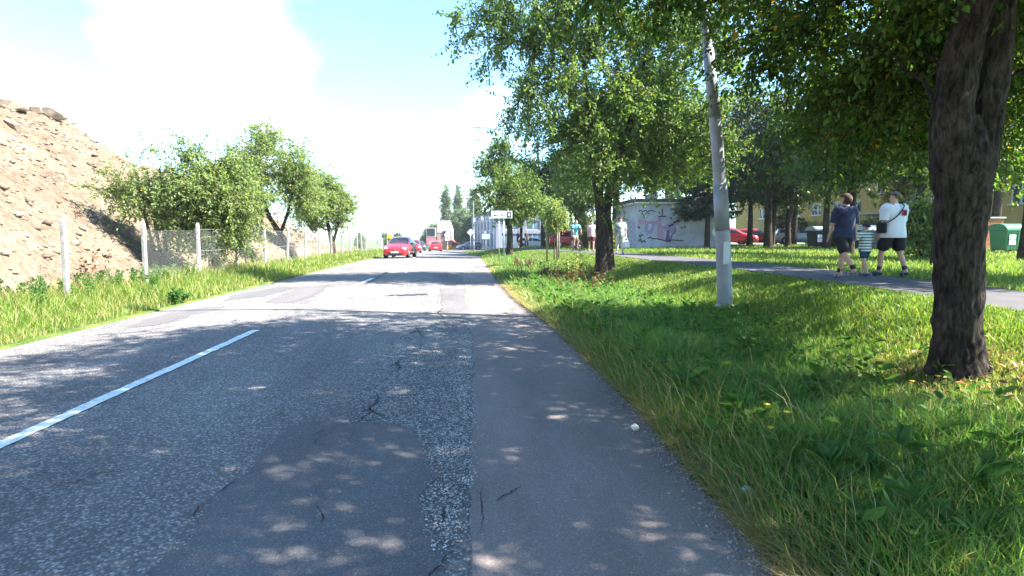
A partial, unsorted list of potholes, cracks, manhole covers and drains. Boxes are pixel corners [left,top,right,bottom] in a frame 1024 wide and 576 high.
crack [358,394,382,421]
crack [480,485,519,531]
